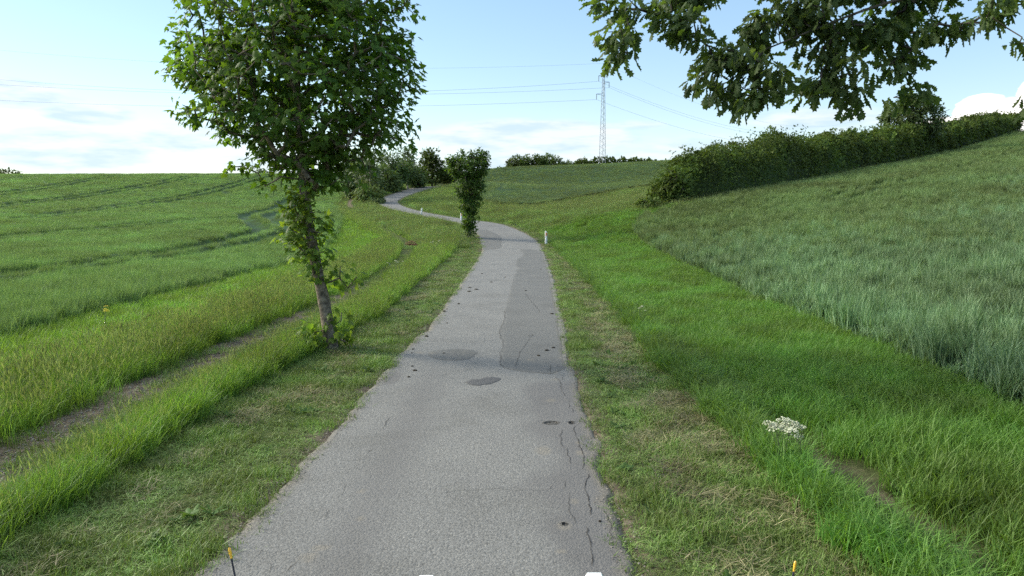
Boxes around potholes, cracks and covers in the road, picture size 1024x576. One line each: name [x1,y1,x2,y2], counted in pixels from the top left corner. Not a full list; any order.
crack [559,428,612,566]
